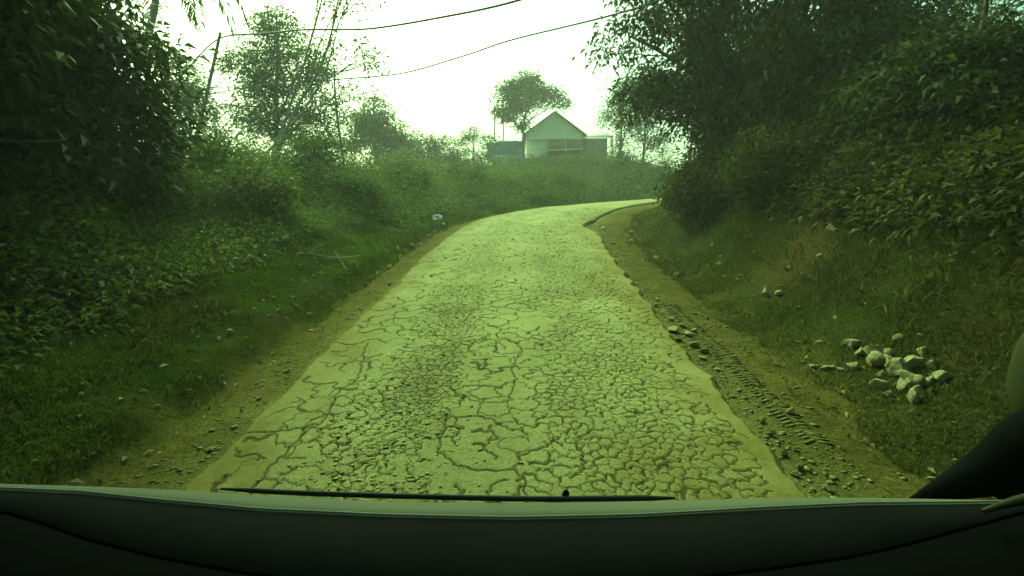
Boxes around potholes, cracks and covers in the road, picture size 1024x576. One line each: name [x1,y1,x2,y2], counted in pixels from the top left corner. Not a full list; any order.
crack [209,208,769,503]
